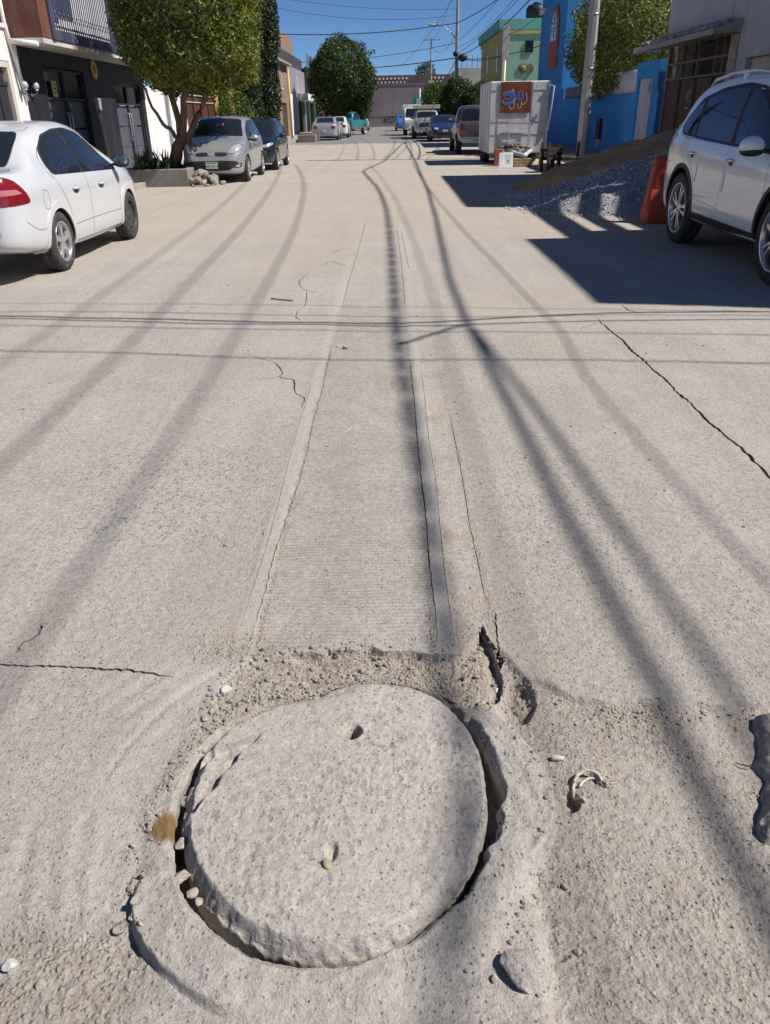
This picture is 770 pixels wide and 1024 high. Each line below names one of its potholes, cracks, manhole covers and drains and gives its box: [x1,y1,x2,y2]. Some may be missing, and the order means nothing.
crack [479,613,504,670]
crack [244,353,305,407]
crack [582,305,770,479]
manhole cover [181,684,488,968]
crack [295,235,350,320]
pothole [504,677,538,726]
pothole [212,624,504,717]
crack [0,624,172,677]
